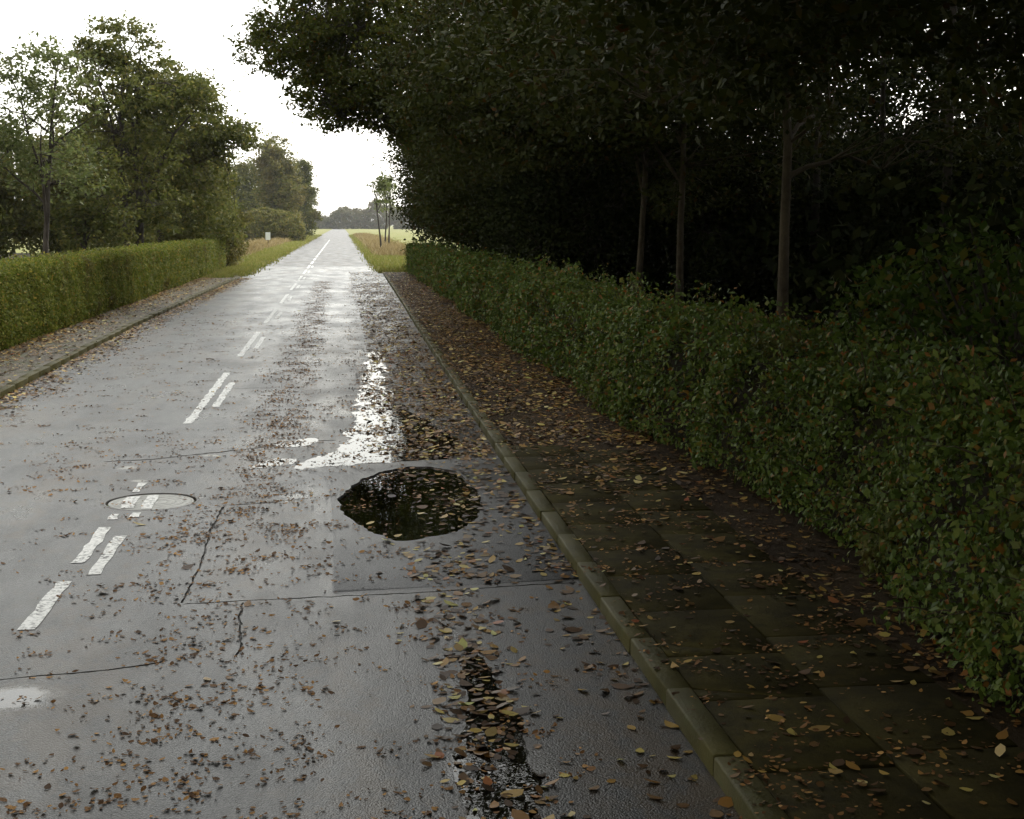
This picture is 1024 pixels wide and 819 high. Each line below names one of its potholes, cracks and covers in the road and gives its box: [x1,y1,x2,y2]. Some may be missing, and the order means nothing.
manhole cover [103,493,200,511]
pothole [337,466,484,541]
crack [181,498,577,657]
